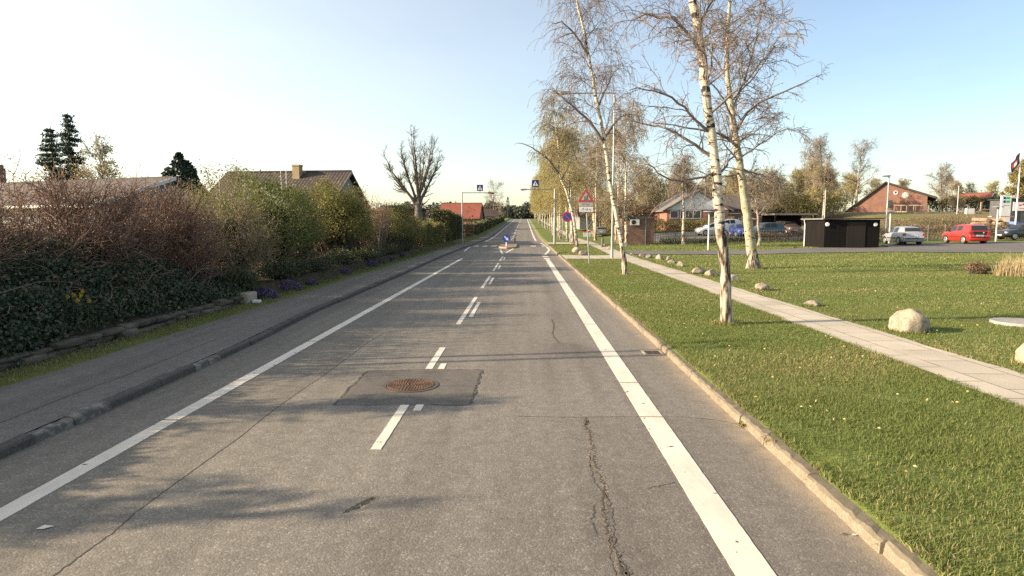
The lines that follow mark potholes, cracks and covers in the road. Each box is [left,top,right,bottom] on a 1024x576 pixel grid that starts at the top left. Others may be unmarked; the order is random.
crack [528,416,737,576]
manhole cover [382,378,439,393]
